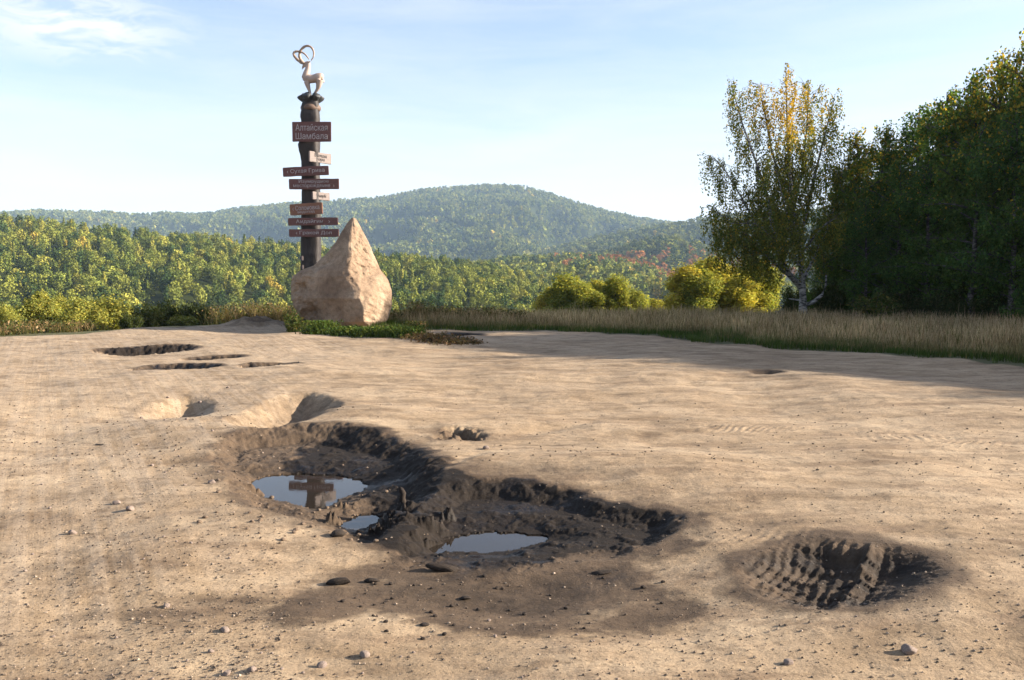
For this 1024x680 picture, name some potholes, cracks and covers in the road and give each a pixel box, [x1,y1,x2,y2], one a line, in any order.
pothole [720,531,968,617]
pothole [215,389,351,429]
pothole [232,361,302,369]
pothole [378,472,696,587]
pothole [123,362,229,371]
pothole [127,395,226,420]
pothole [422,423,498,442]
pothole [85,343,205,357]
pothole [196,419,454,549]
